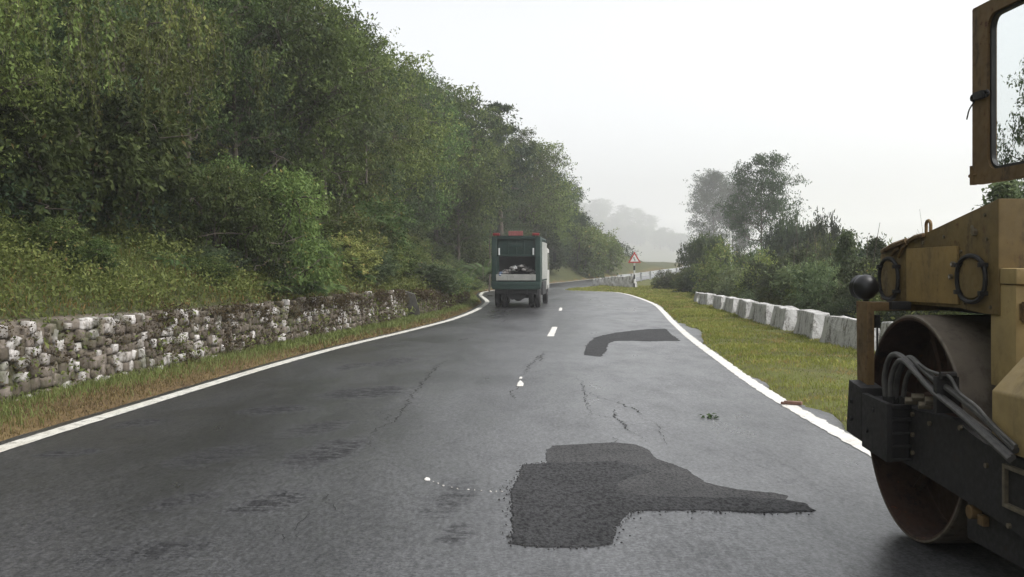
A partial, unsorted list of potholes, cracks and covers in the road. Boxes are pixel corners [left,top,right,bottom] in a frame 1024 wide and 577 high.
crack [578,379,666,444]
crack [369,361,446,449]
